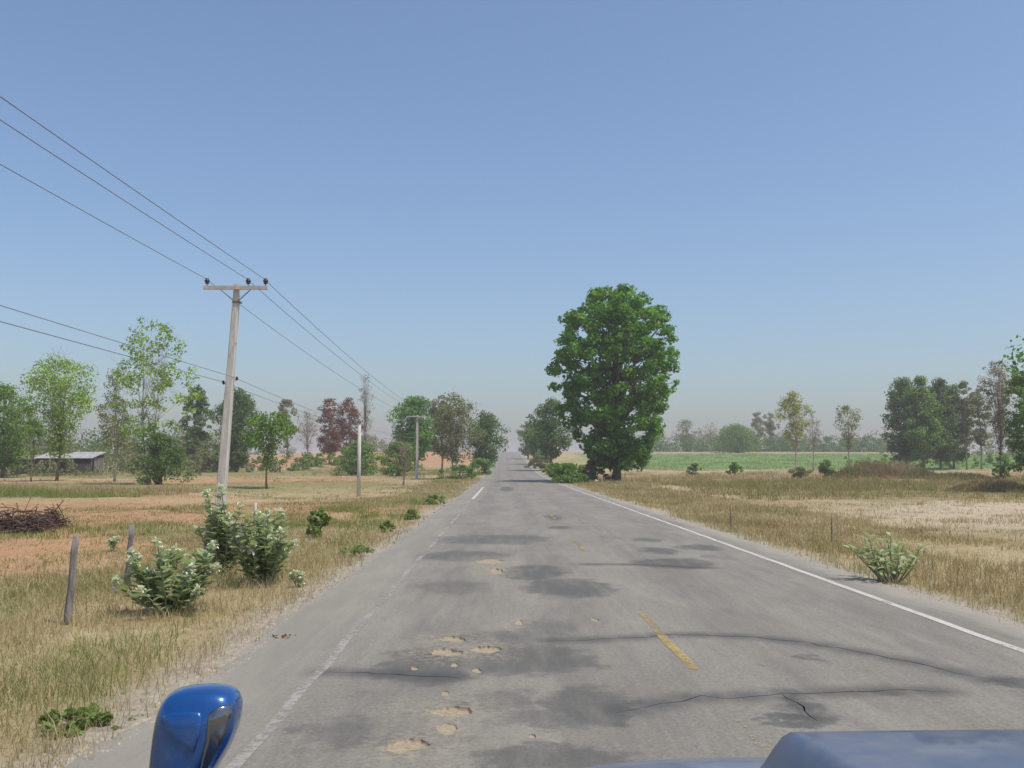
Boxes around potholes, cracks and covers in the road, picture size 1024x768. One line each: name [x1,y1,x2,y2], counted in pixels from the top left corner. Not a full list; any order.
crack [541,634,1007,683]
pothole [436,723,458,735]
crack [616,689,939,720]
pothole [429,706,473,717]
pothole [384,738,430,754]
pothole [428,648,463,656]
